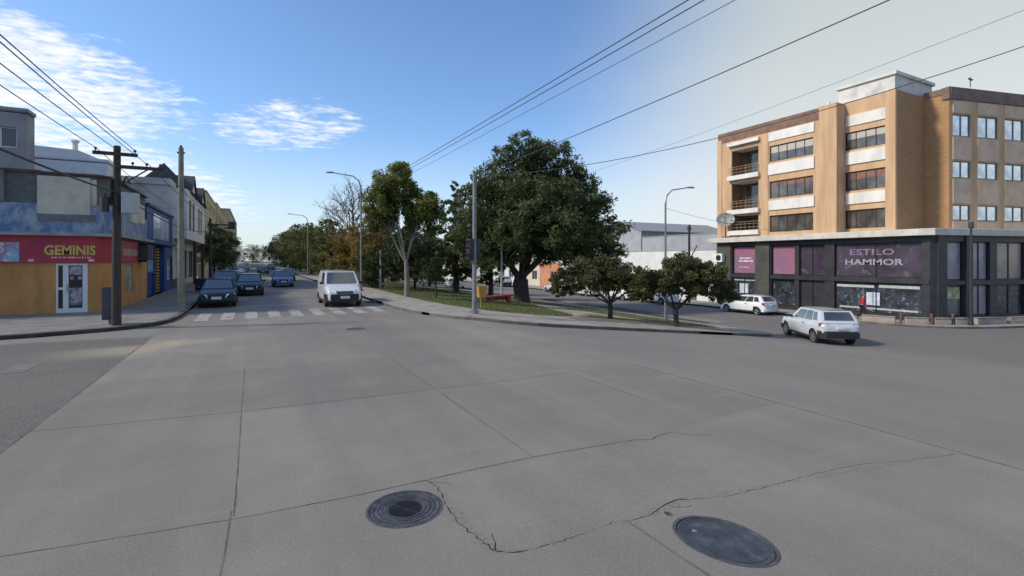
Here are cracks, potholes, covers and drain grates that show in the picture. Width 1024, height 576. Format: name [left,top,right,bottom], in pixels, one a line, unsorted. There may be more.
manhole cover [672,515,781,568]
manhole cover [366,490,443,529]
crack [425,454,953,553]
